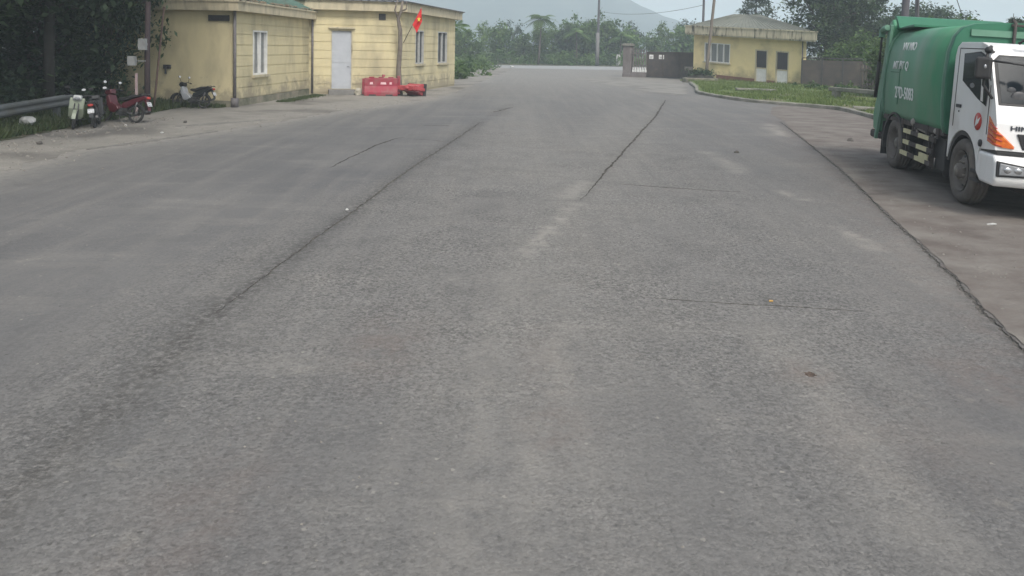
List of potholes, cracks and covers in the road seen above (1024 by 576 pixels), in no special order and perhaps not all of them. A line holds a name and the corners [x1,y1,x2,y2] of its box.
crack [580,101,732,200]
crack [647,122,1024,354]
crack [217,123,479,312]
